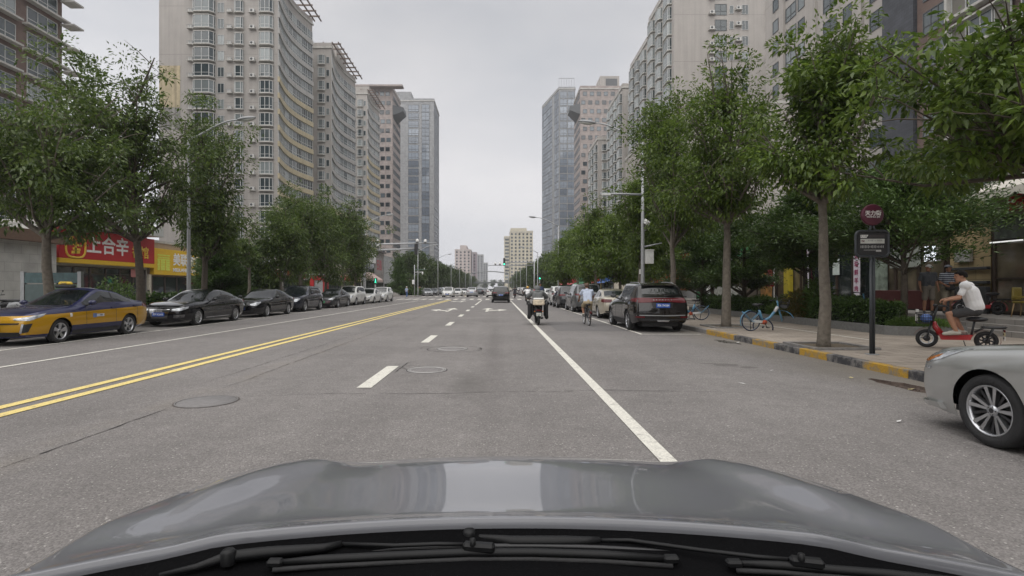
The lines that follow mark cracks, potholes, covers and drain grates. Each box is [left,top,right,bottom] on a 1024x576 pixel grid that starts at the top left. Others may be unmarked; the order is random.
manhole cover [172,395,240,408]
